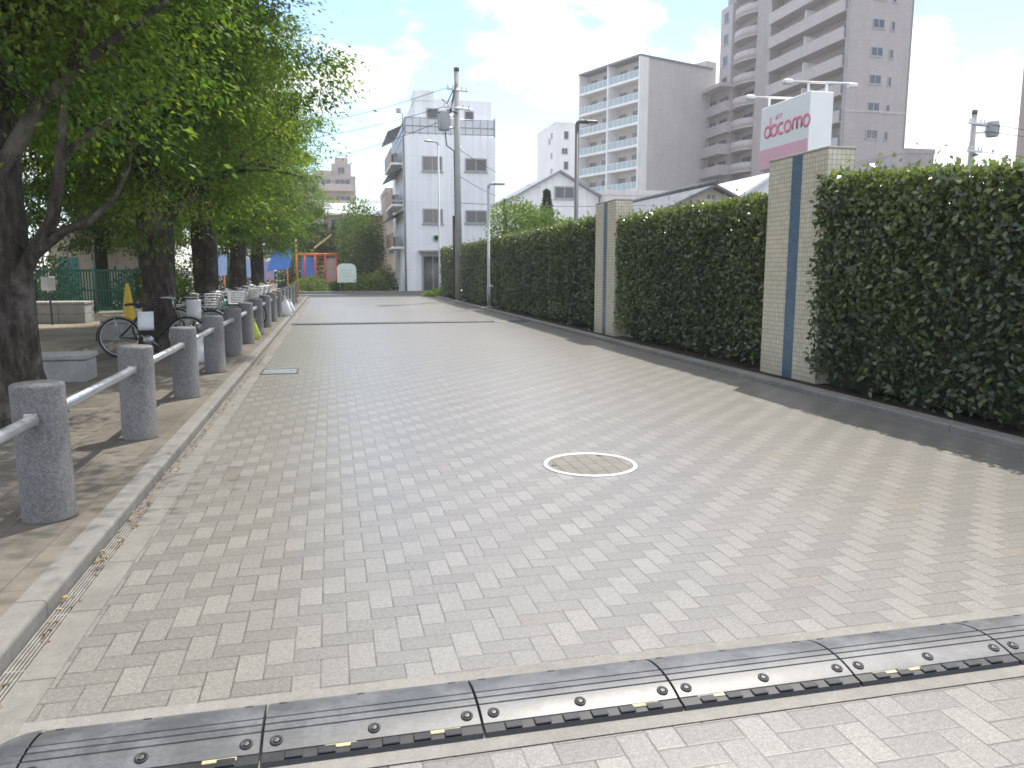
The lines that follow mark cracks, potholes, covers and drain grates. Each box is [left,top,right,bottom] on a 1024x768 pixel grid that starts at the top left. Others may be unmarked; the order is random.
manhole cover [542,453,639,477]
